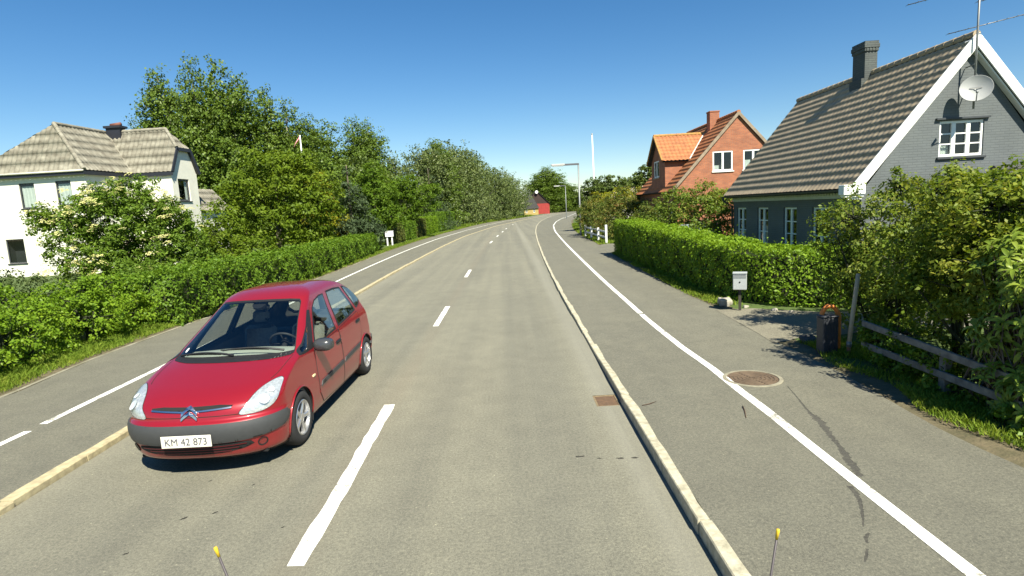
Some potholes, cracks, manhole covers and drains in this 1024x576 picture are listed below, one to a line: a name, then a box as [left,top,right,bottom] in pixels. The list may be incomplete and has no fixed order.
crack [787,386,870,562]
manhole cover [722,370,784,387]
drain grate [593,395,621,406]
